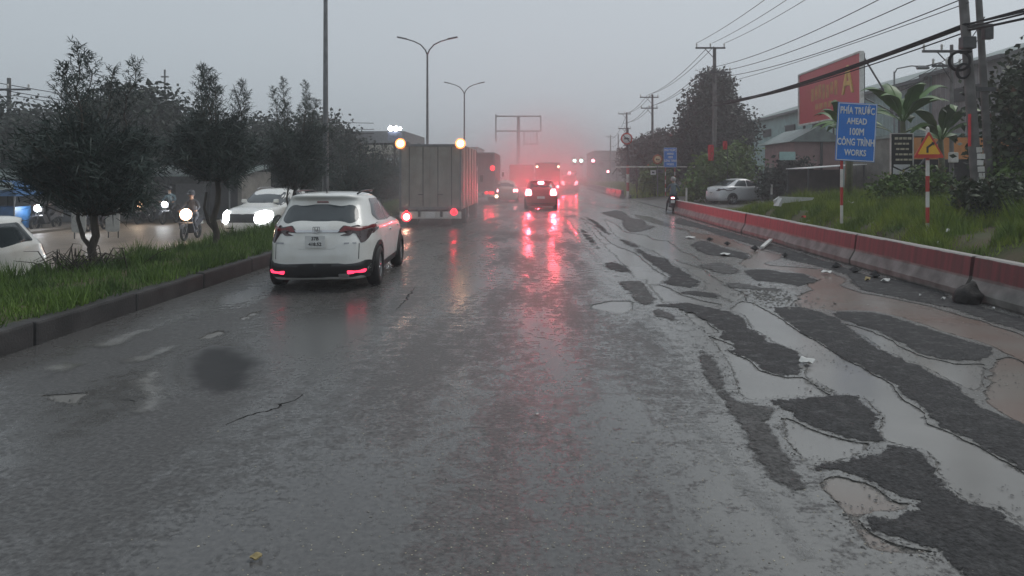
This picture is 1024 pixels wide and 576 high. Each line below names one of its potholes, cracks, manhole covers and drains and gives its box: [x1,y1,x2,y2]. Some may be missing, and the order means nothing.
pothole [42,392,89,406]
pothole [590,301,634,314]
pothole [730,301,1024,529]
crack [226,392,307,425]
pothole [819,476,932,554]
